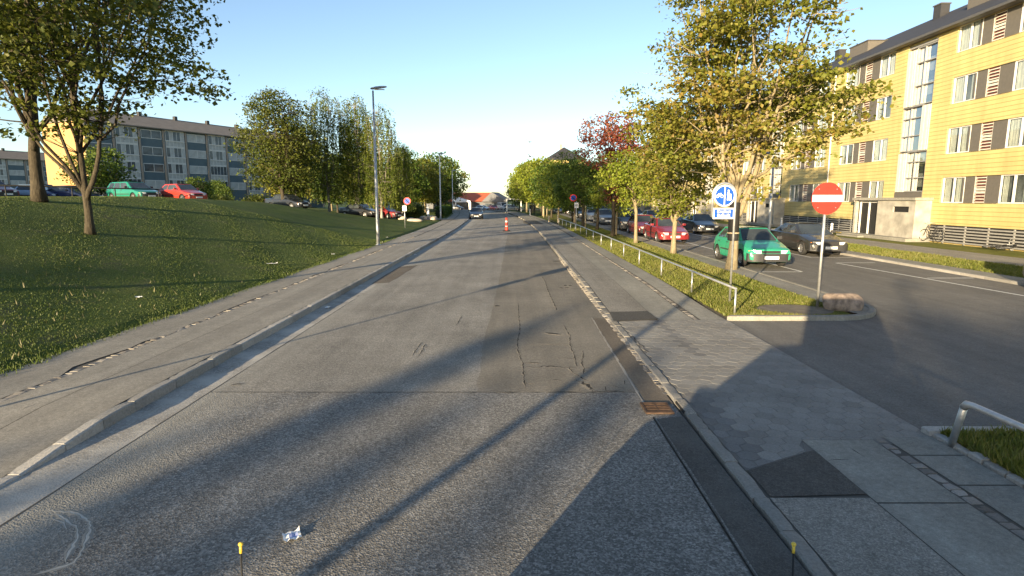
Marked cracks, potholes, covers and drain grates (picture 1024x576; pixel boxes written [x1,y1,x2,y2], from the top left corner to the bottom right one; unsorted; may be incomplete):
crack [498,277,626,393]
crack [412,343,427,356]
crack [35,510,94,575]
drain grate [640,399,697,415]
